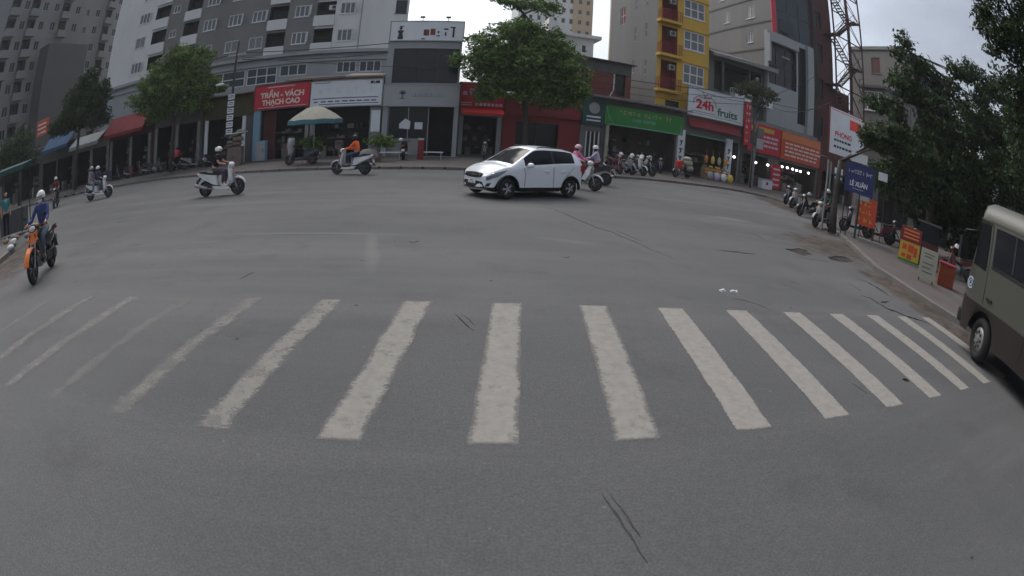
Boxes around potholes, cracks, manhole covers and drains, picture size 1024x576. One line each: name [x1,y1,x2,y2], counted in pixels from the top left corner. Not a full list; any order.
crack [602,494,648,563]
crack [546,207,673,259]
crack [848,279,929,324]
